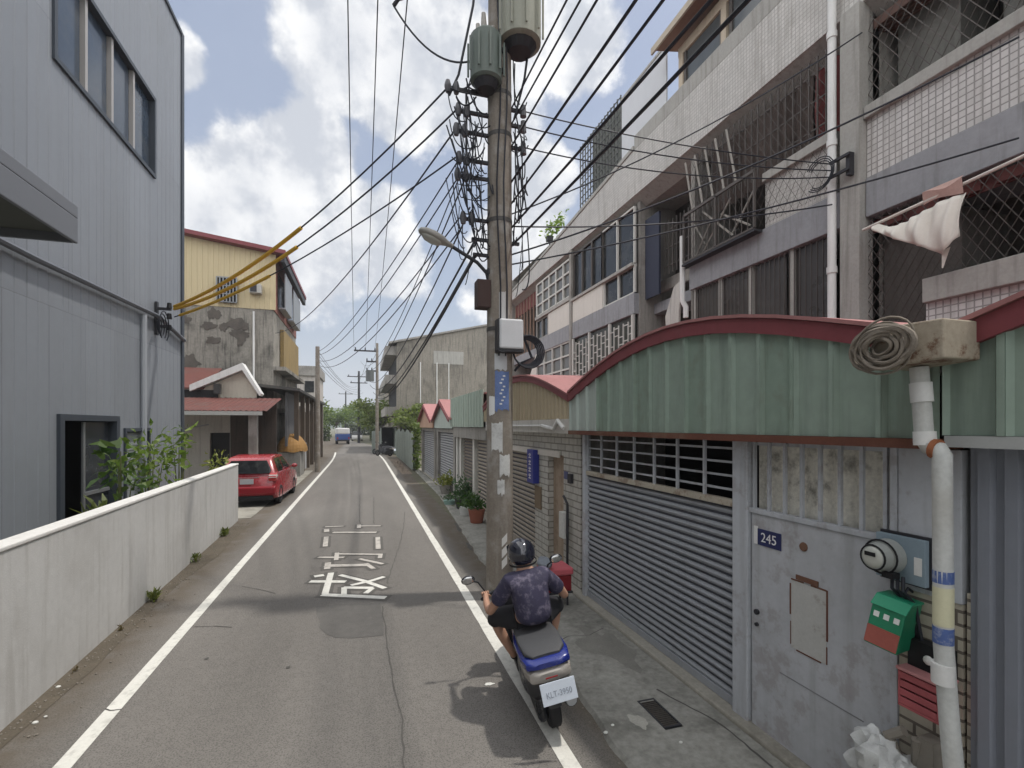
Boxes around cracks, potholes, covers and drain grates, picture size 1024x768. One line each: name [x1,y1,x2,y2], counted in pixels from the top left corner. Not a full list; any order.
crack [382,606,405,768]
drain grate [637,698,682,730]
